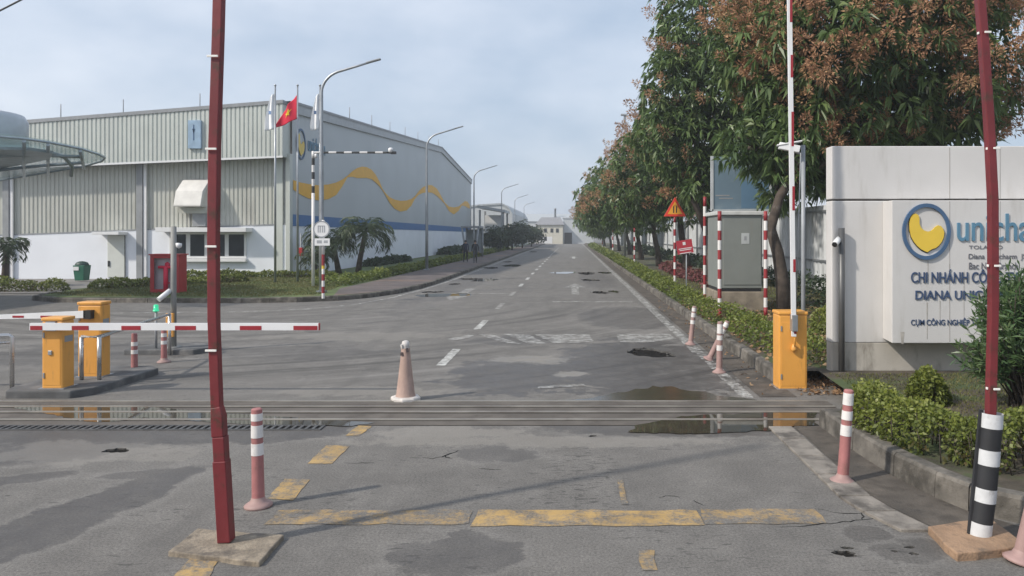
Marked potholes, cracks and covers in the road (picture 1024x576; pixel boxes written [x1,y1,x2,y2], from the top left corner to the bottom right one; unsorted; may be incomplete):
pothole [627,347,676,358]
crack [797,509,873,527]
